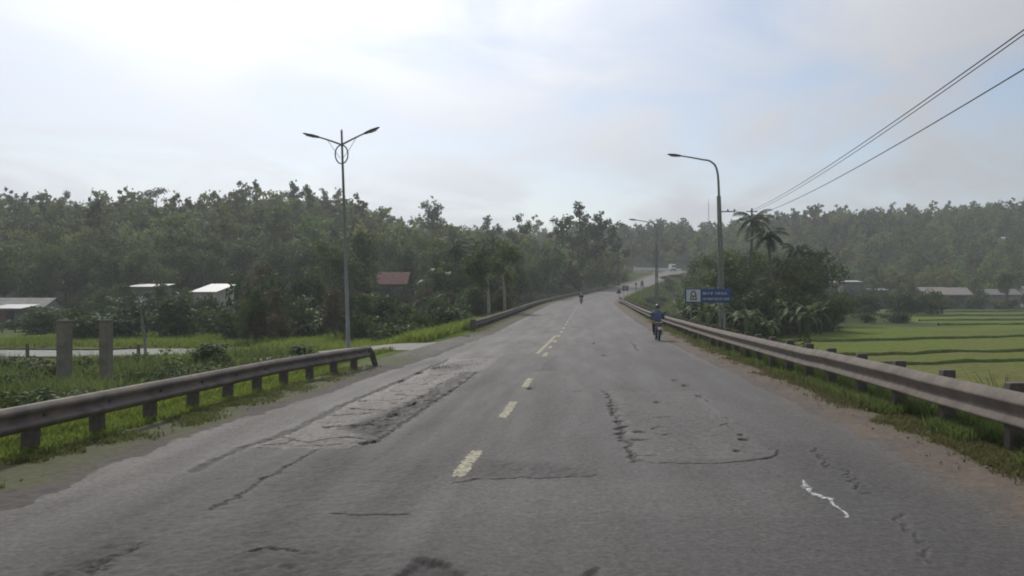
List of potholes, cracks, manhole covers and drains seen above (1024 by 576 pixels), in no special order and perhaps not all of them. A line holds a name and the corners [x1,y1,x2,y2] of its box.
pothole [395,557,468,576]
crack [602,390,781,464]
crack [73,543,140,576]
crack [188,359,493,510]
crack [891,513,936,565]
